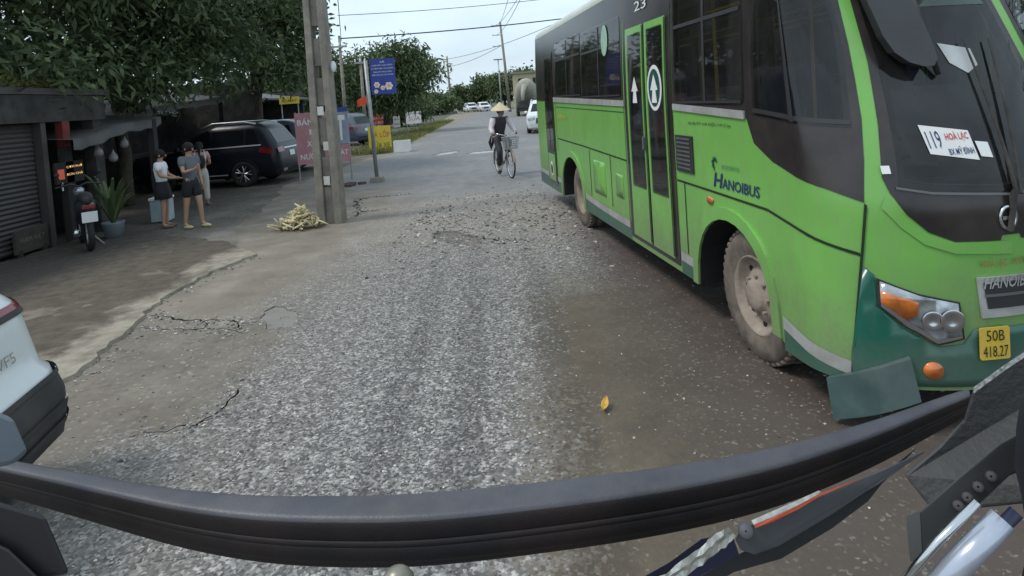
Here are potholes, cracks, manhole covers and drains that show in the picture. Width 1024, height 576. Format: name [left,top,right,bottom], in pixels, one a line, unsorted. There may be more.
crack [149,315,258,333]
crack [145,385,243,433]
pothole [431,231,484,250]
